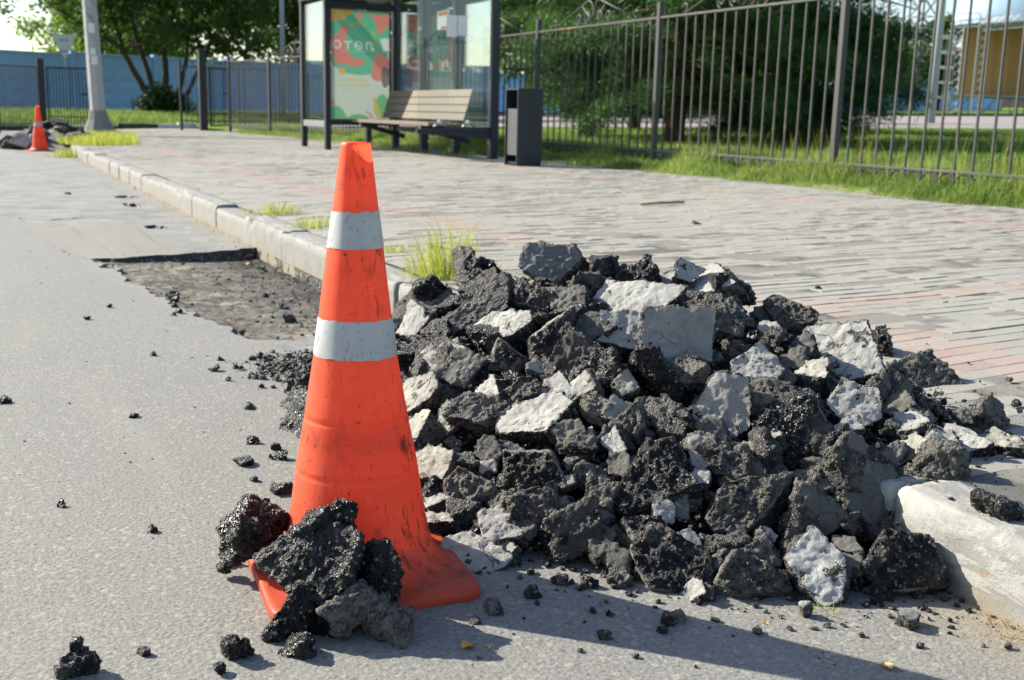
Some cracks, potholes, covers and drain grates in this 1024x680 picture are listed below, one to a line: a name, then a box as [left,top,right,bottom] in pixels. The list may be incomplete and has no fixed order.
pothole [91,247,323,341]
